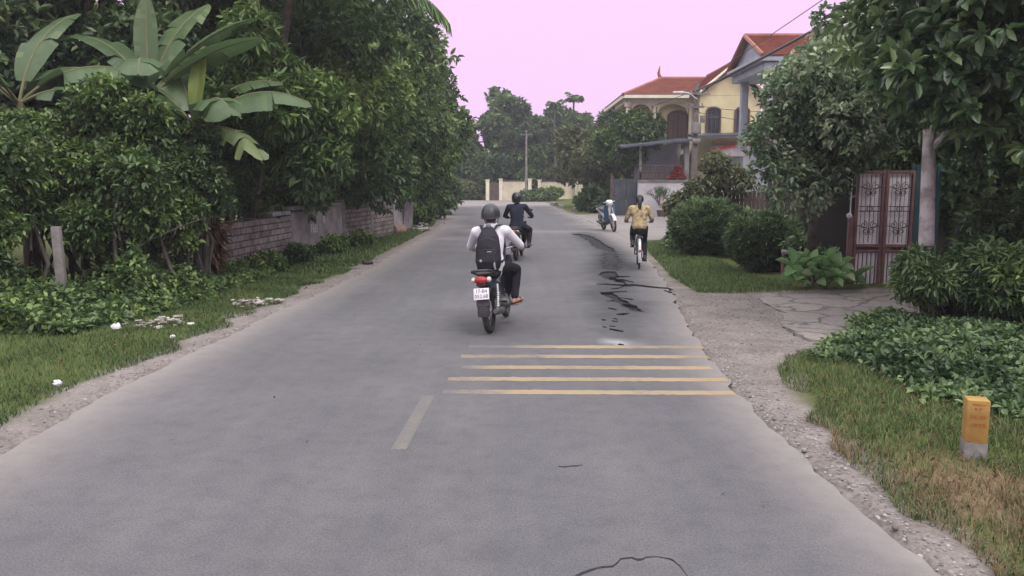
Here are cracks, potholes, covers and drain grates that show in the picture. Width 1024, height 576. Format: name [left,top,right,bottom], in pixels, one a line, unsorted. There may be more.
crack [574,556,688,576]
crack [573,234,676,345]
